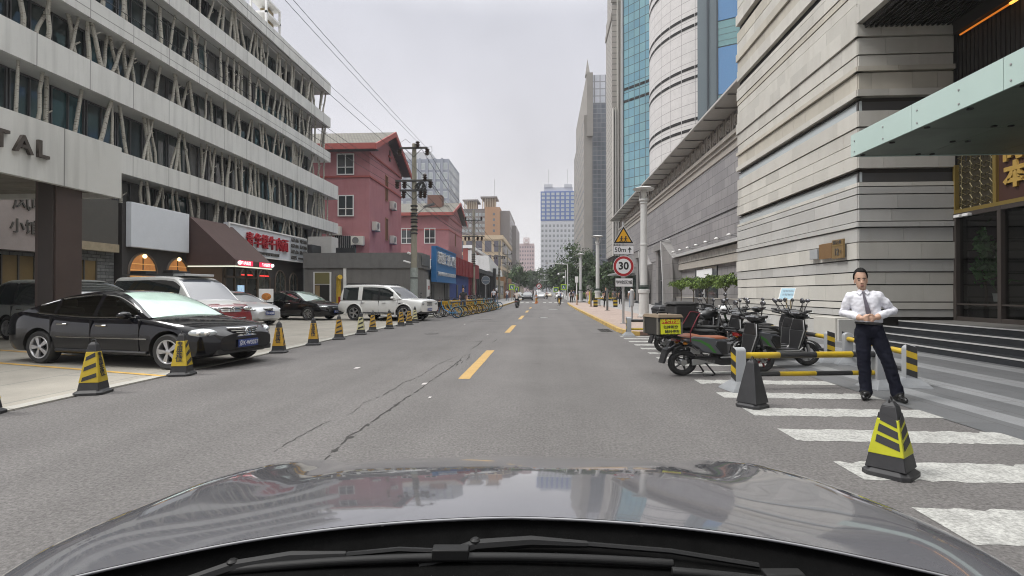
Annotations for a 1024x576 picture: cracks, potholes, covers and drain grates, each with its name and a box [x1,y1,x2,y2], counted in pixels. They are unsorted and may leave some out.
crack [282,339,497,460]
